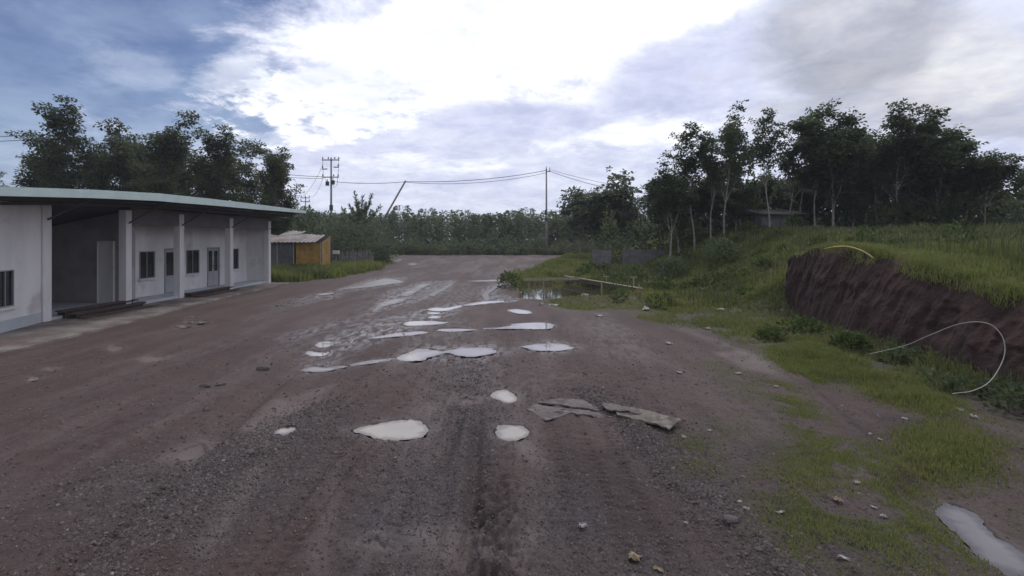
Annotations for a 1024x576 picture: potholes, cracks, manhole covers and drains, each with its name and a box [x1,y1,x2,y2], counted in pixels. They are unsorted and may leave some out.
pothole [930,503,1024,576]
pothole [521,343,574,352]
pothole [300,365,348,373]
pothole [368,331,428,339]
pothole [353,419,429,441]
pothole [495,425,529,442]
pothole [396,347,497,363]
pothole [490,390,517,403]
